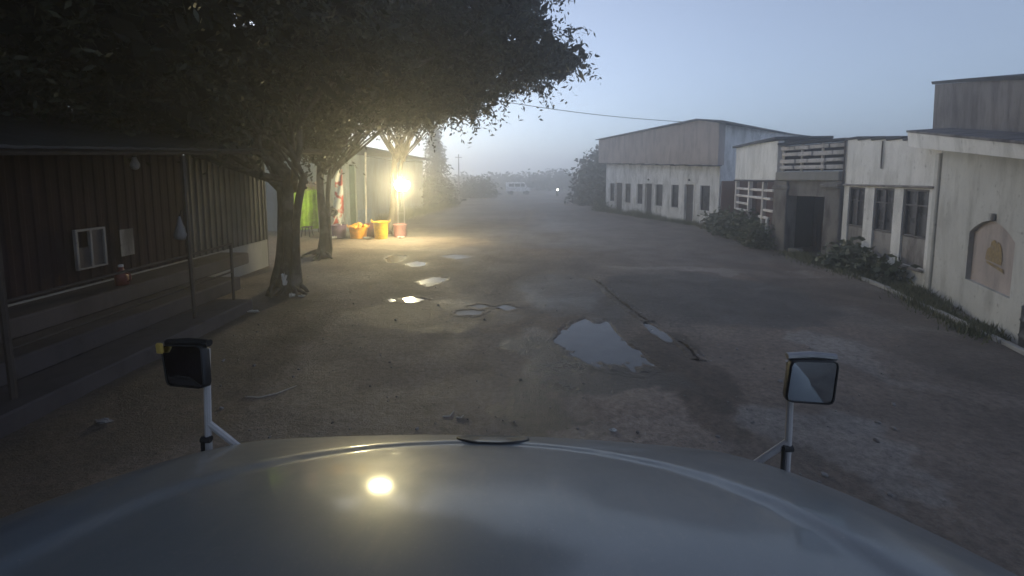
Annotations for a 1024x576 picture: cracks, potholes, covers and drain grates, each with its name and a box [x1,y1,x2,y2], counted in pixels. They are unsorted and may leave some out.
crack [672,339,712,362]
pothole [450,308,491,318]
pothole [489,303,524,313]
pothole [400,260,431,268]
pothole [412,276,452,288]
pothole [397,294,434,304]
pothole [463,302,494,311]
pothole [637,319,677,345]
crack [588,278,656,322]
pothole [381,254,411,264]
pothole [545,315,665,379]
